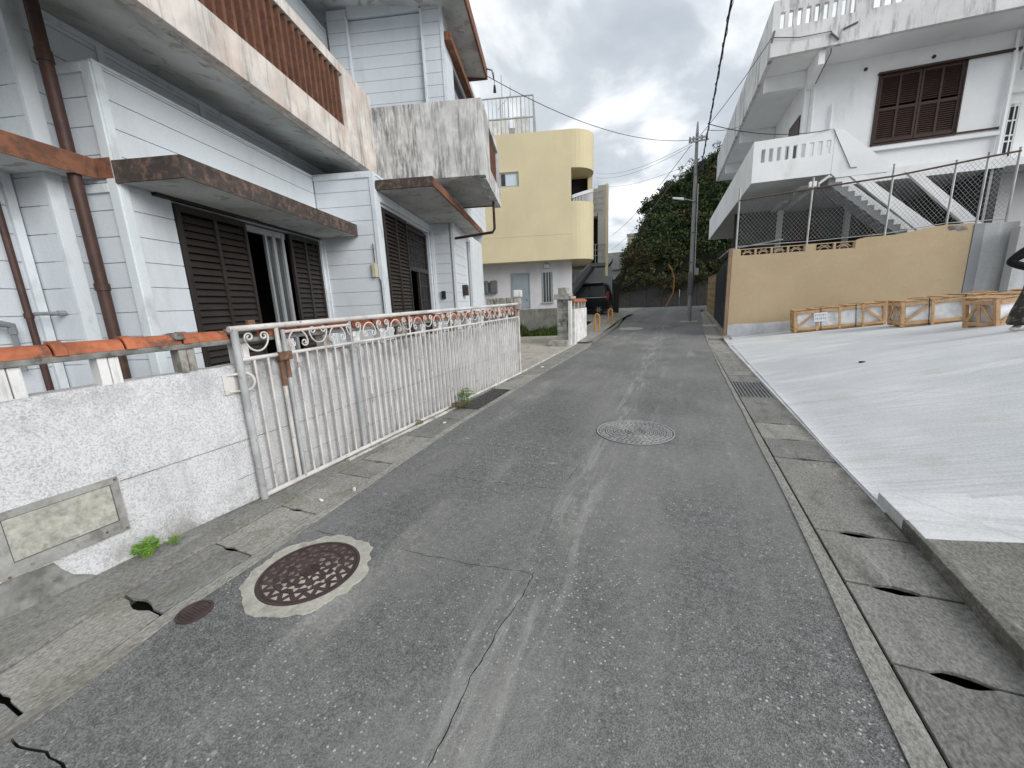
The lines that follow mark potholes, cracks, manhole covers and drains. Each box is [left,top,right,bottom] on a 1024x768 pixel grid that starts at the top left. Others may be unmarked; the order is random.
crack [11,740,66,768]
crack [322,532,533,767]
manhole cover [238,534,373,618]
manhole cover [596,420,676,446]
drain grate [458,389,510,410]
manhole cover [174,599,214,625]
drain grate [731,381,776,399]
